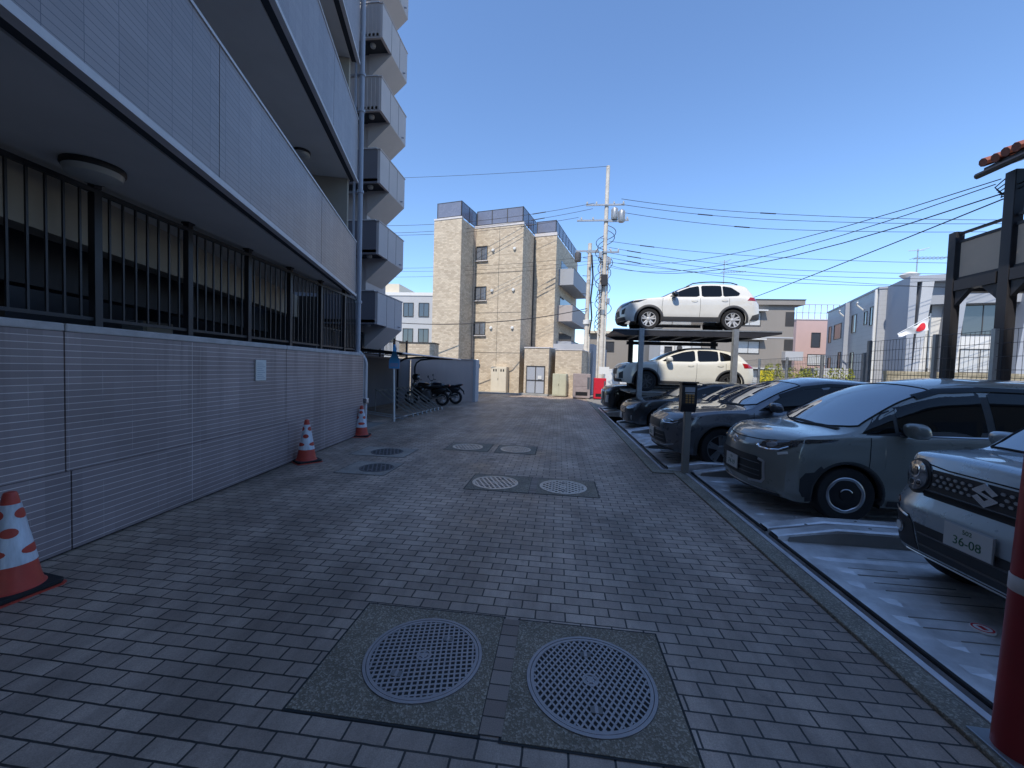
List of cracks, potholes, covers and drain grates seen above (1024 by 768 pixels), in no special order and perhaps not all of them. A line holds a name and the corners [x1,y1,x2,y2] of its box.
manhole cover [348,446,419,458]
manhole cover [443,442,494,452]
manhole cover [281,602,506,738]
manhole cover [463,474,533,493]
manhole cover [498,619,705,768]
manhole cover [333,461,404,476]
manhole cover [494,445,537,455]
manhole cover [535,478,600,498]
